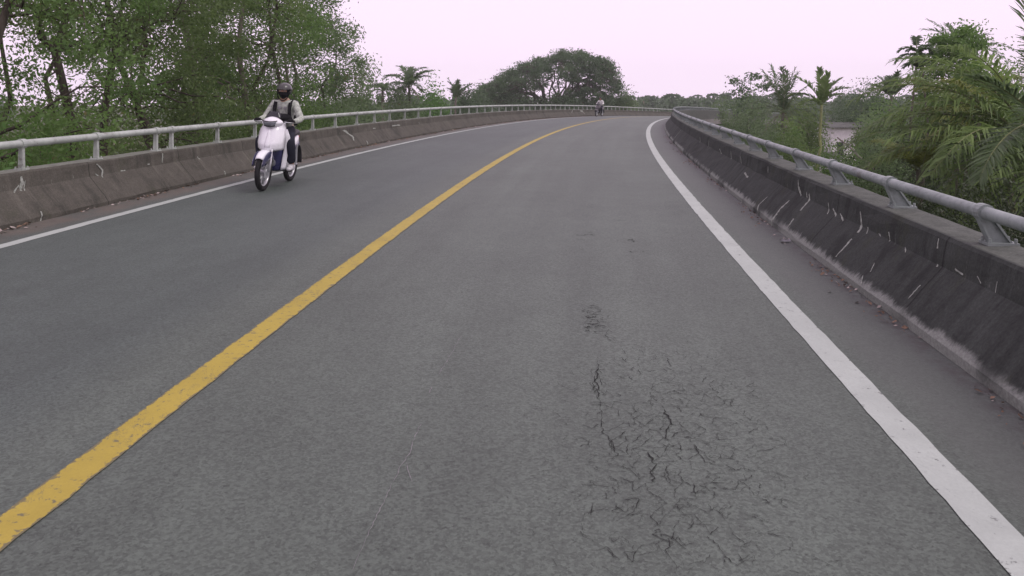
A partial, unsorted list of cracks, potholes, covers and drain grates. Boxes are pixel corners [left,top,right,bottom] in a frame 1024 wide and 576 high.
crack [533,333,838,574]
crack [353,337,461,568]
